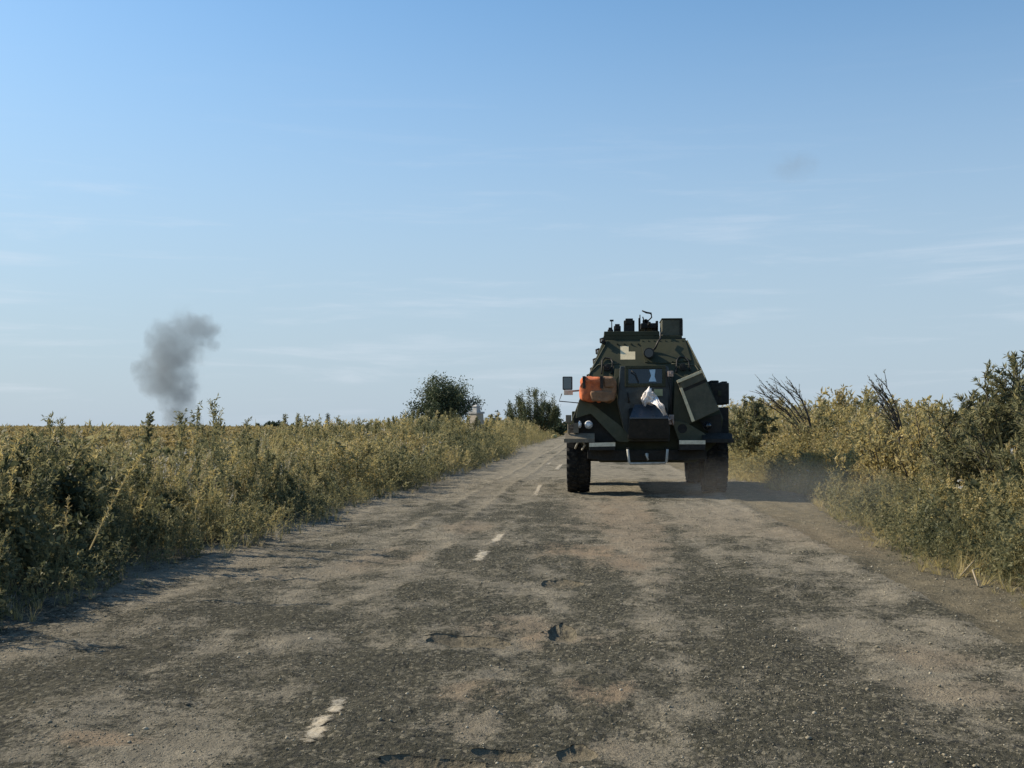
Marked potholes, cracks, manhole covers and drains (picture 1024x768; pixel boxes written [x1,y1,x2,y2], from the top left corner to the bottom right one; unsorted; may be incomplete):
pothole [471,748,532,763]
pothole [378,754,486,768]
pothole [556,744,598,763]
pothole [547,624,577,642]
pothole [541,580,584,589]
